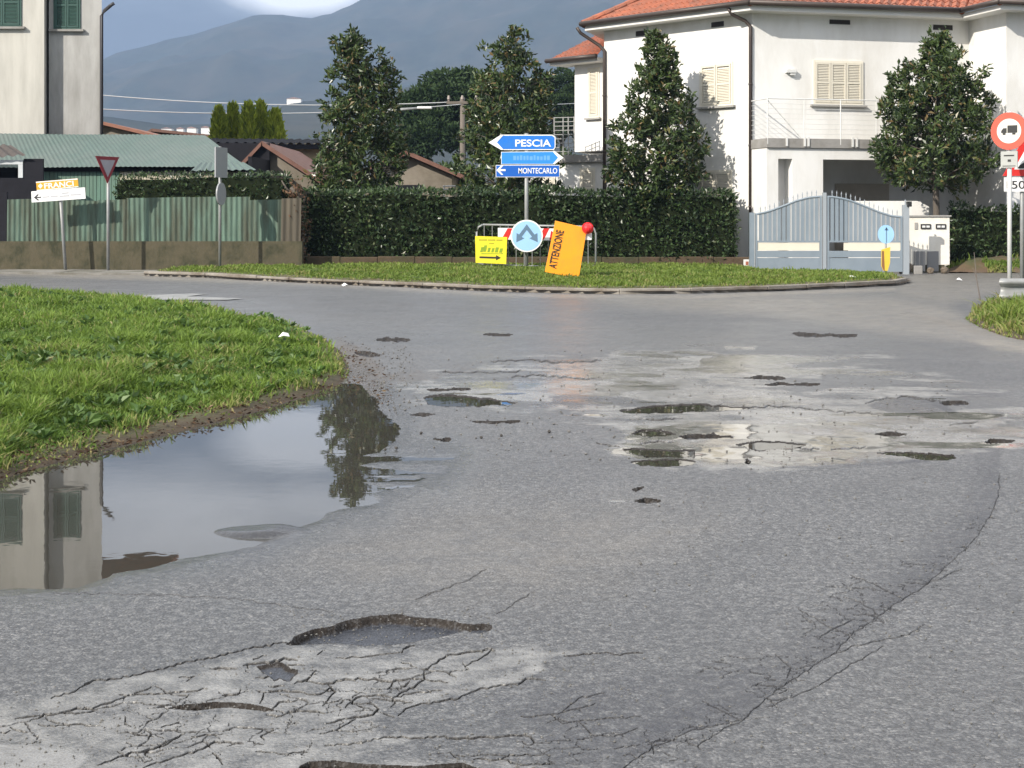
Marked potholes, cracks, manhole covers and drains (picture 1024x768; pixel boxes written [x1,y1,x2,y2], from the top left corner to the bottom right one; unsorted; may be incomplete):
pothole [300,760,476,768]
pothole [286,614,471,646]
pothole [631,459,696,467]
pothole [423,394,515,407]
pothole [619,403,750,414]
pothole [257,662,298,682]
pothole [632,429,676,438]
crack [0,477,1001,768]
pothole [678,432,733,440]
pothole [465,623,492,634]
pothole [624,448,695,458]
pothole [877,451,956,461]
